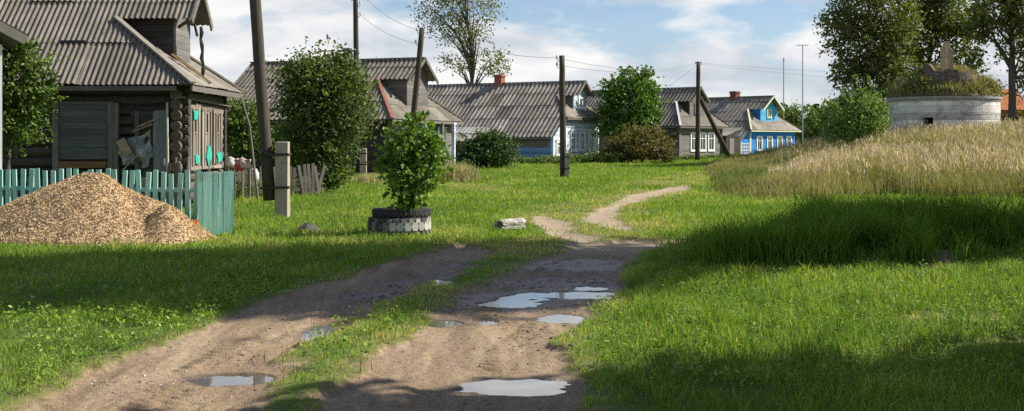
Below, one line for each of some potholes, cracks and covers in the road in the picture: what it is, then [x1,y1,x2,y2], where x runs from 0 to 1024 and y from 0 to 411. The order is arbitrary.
pothole [473,291,624,309]
pothole [449,377,584,396]
pothole [422,319,466,328]
pothole [411,278,455,286]
pothole [181,372,282,387]
pothole [532,313,590,324]
pothole [299,325,340,340]
